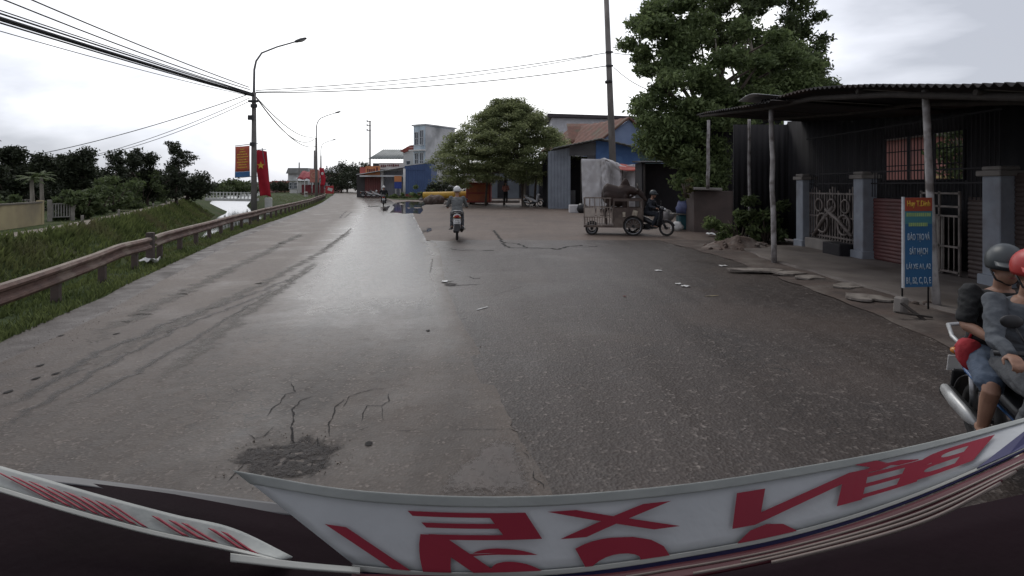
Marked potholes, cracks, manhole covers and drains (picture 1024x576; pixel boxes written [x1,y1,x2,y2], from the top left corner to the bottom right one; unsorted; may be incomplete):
pothole [236,436,341,479]
crack [251,383,415,473]
crack [483,230,528,251]
